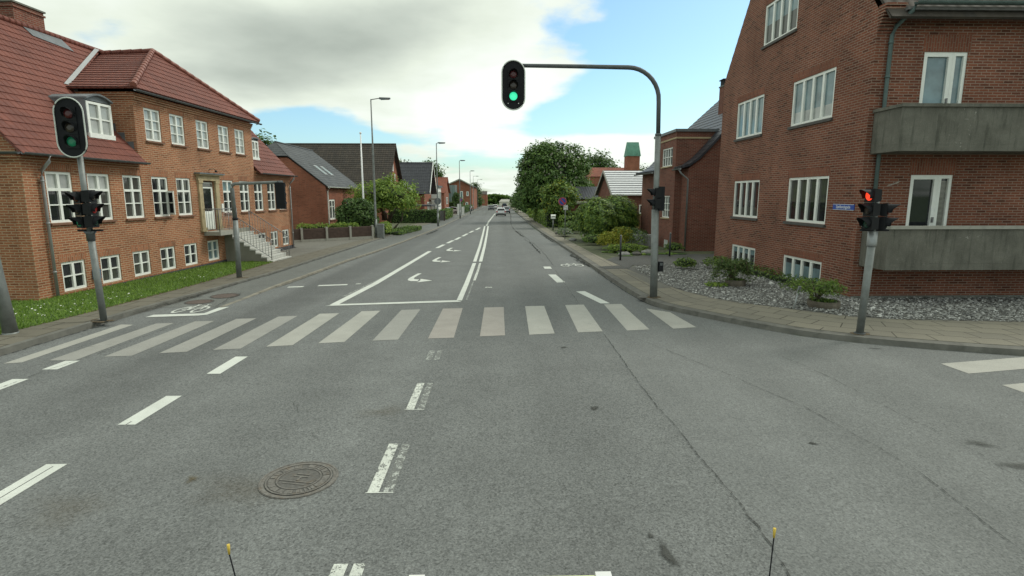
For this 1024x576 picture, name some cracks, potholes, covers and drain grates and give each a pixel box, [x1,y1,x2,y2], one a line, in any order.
crack [589,323,1024,576]
manhole cover [258,461,339,499]
